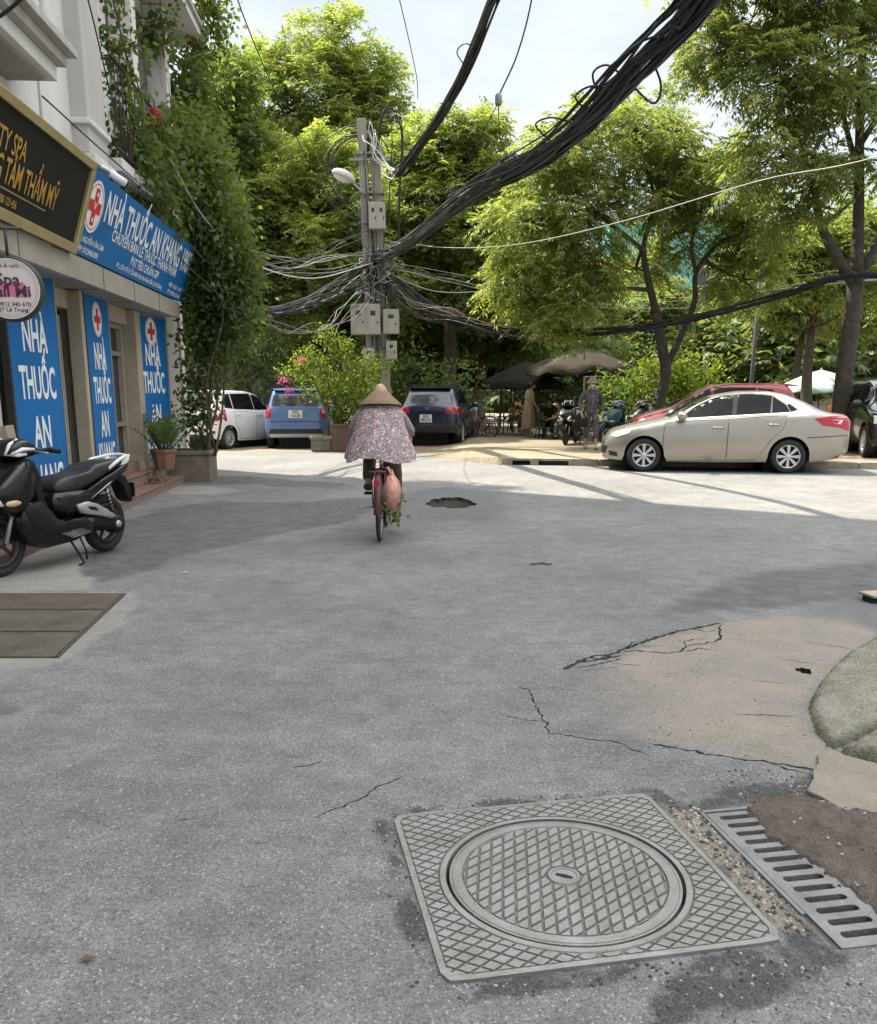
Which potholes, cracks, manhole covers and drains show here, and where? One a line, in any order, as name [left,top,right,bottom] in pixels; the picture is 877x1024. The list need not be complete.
drain grate [698,800,877,950]
crack [501,687,814,774]
crack [314,776,404,819]
manhole cover [394,794,779,984]
crack [563,623,723,671]
pothole [426,497,477,508]
